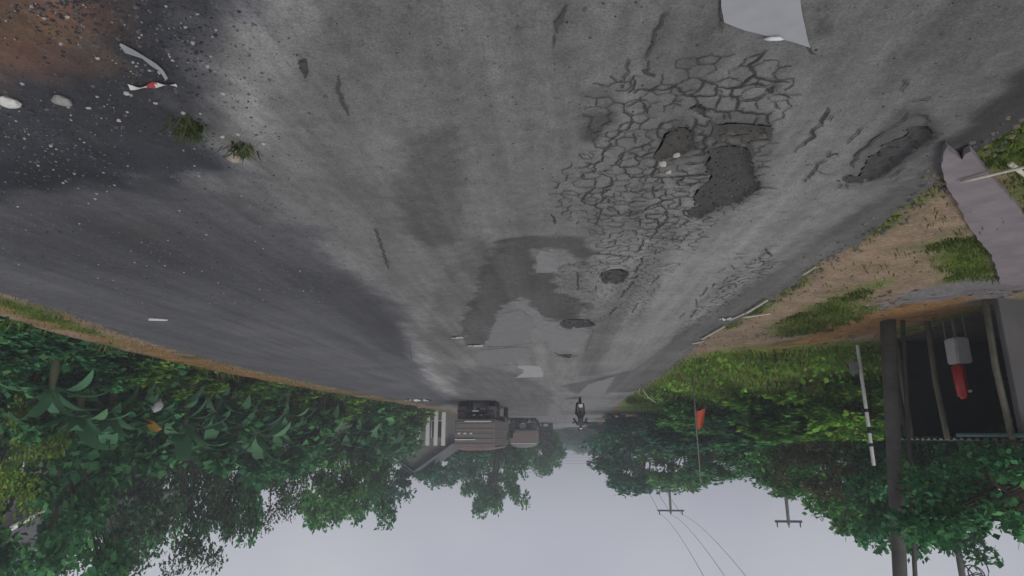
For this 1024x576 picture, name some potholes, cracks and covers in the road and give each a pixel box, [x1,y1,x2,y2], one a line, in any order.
pothole [653,127,695,162]
pothole [842,126,932,183]
pothole [602,269,629,283]
crack [374,230,389,269]
crack [336,79,349,116]
pothole [688,146,760,219]
crack [548,13,943,336]
crack [552,5,568,49]
pothole [298,58,309,78]
pothole [560,319,595,329]
